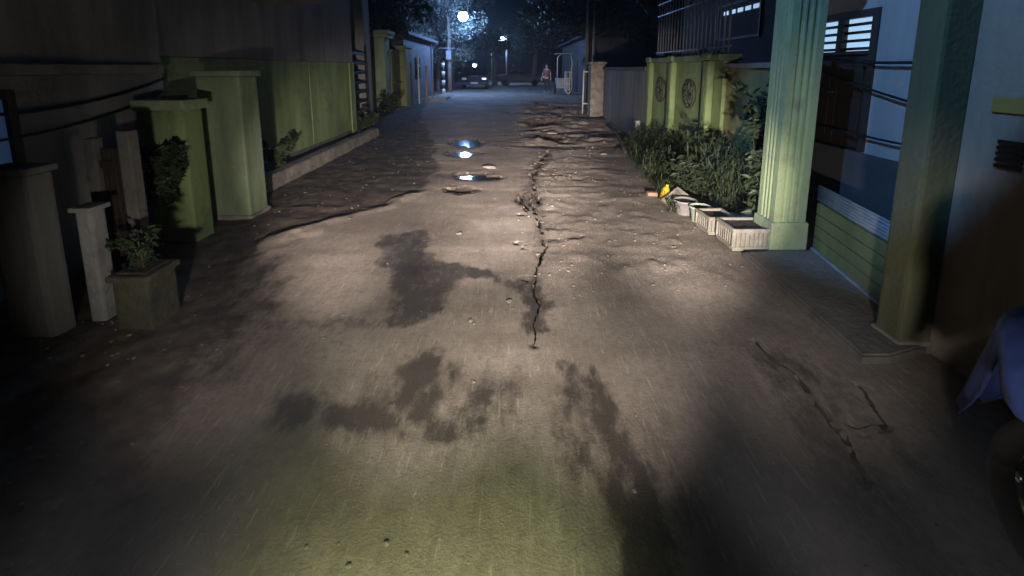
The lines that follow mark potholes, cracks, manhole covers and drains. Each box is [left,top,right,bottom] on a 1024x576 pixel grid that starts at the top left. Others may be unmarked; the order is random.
pothole [442,186,481,195]
crack [488,134,618,348]
crack [498,102,594,121]
pothole [451,171,506,181]
crack [747,341,896,483]
pothole [449,137,488,148]
